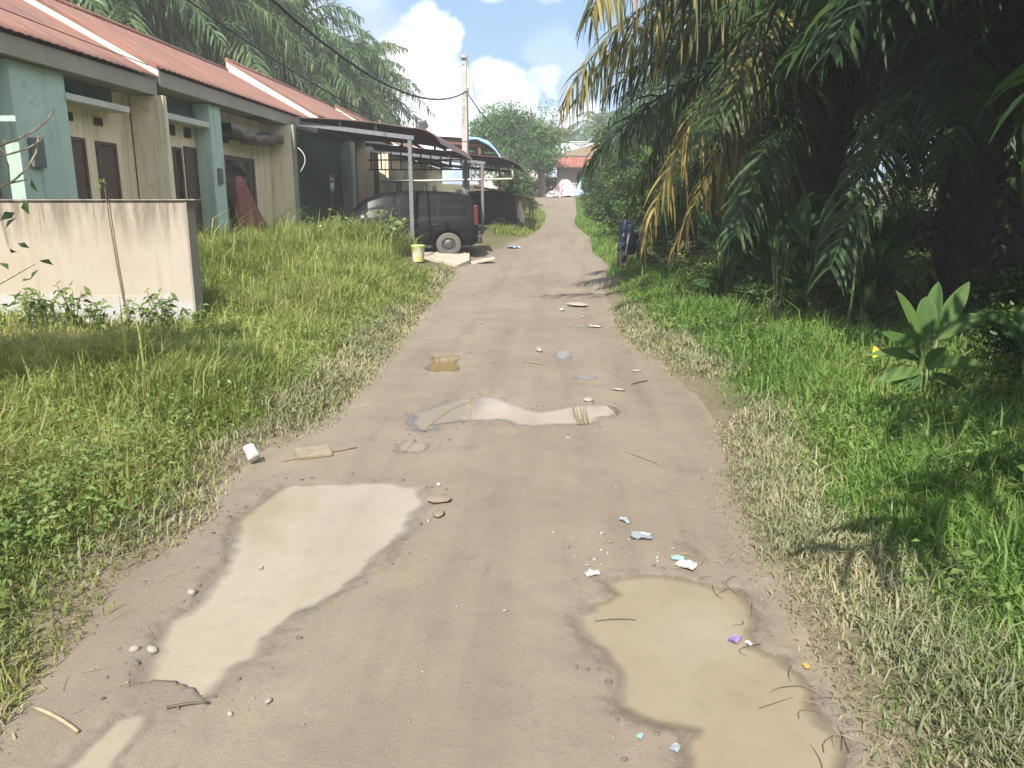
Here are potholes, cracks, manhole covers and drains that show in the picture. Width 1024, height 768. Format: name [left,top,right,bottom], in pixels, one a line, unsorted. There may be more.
pothole [555,564,878,768]
pothole [400,392,629,435]
pothole [103,475,437,724]
pothole [419,352,468,373]
